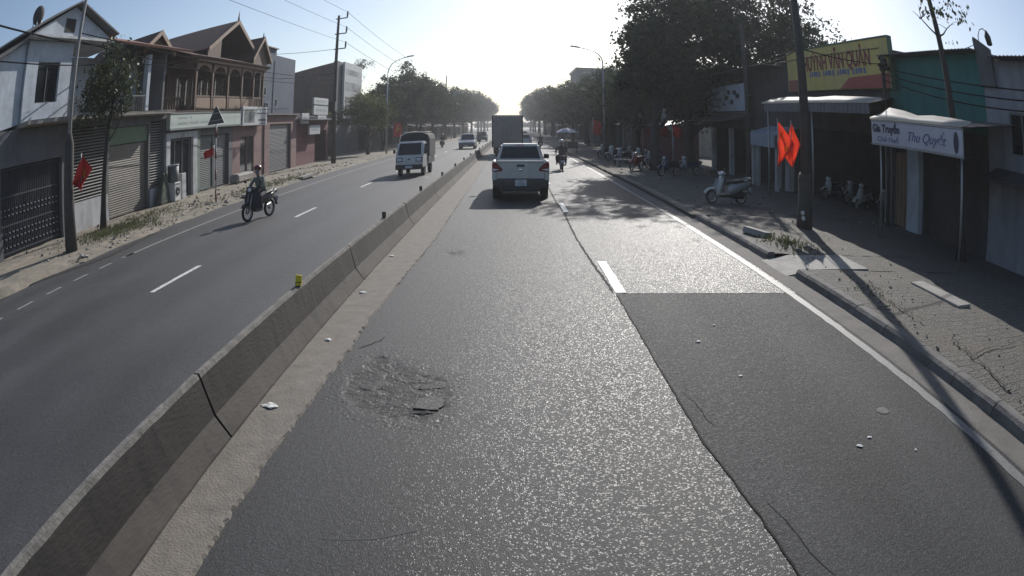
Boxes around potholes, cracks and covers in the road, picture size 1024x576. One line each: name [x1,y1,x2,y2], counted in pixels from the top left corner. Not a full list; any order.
crack [952,336,1016,389]
pothole [284,335,478,451]
